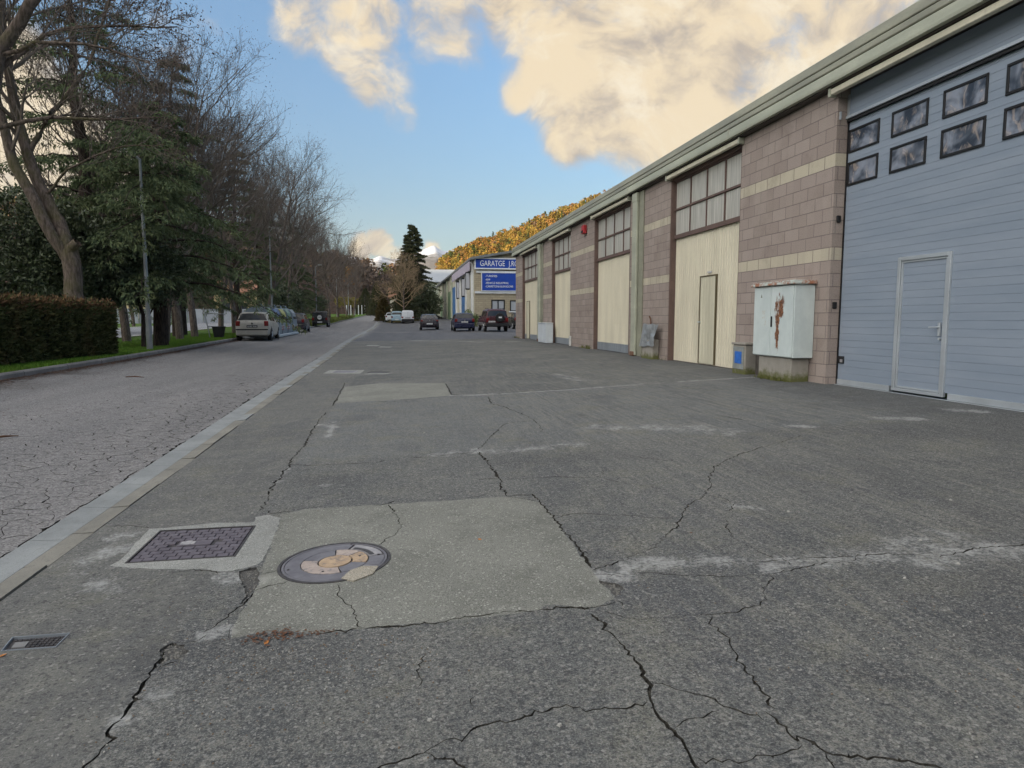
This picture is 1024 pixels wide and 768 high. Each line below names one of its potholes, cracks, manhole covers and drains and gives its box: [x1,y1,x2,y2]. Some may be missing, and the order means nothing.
manhole cover [277,542,391,584]
manhole cover [124,525,256,564]
crack [314,397,942,768]
crack [0,358,318,558]
